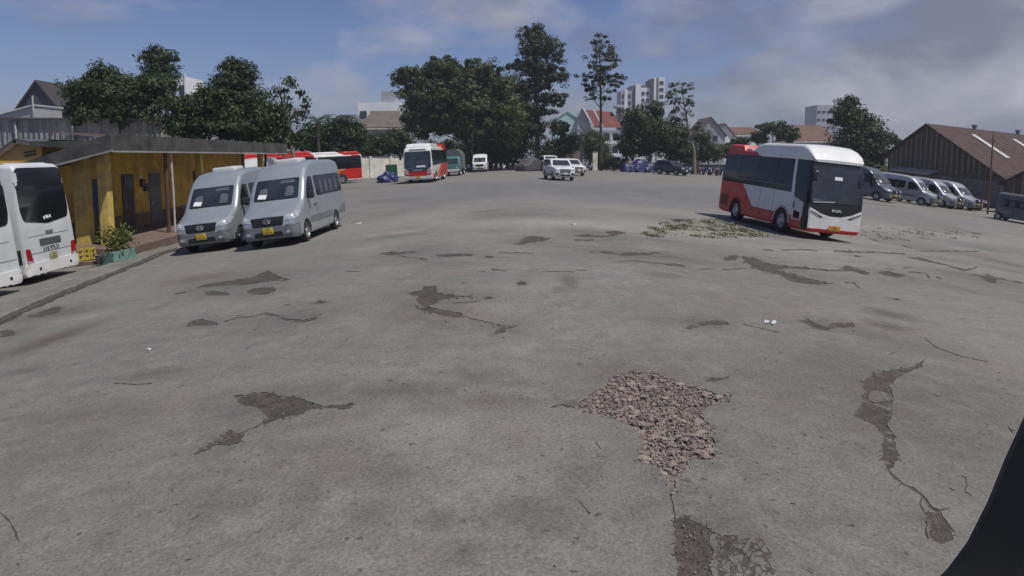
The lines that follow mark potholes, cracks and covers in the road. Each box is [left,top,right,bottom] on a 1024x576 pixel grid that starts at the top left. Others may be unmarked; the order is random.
pothole [574,371,732,495]
crack [0,512,20,542]
pothole [670,515,715,576]
